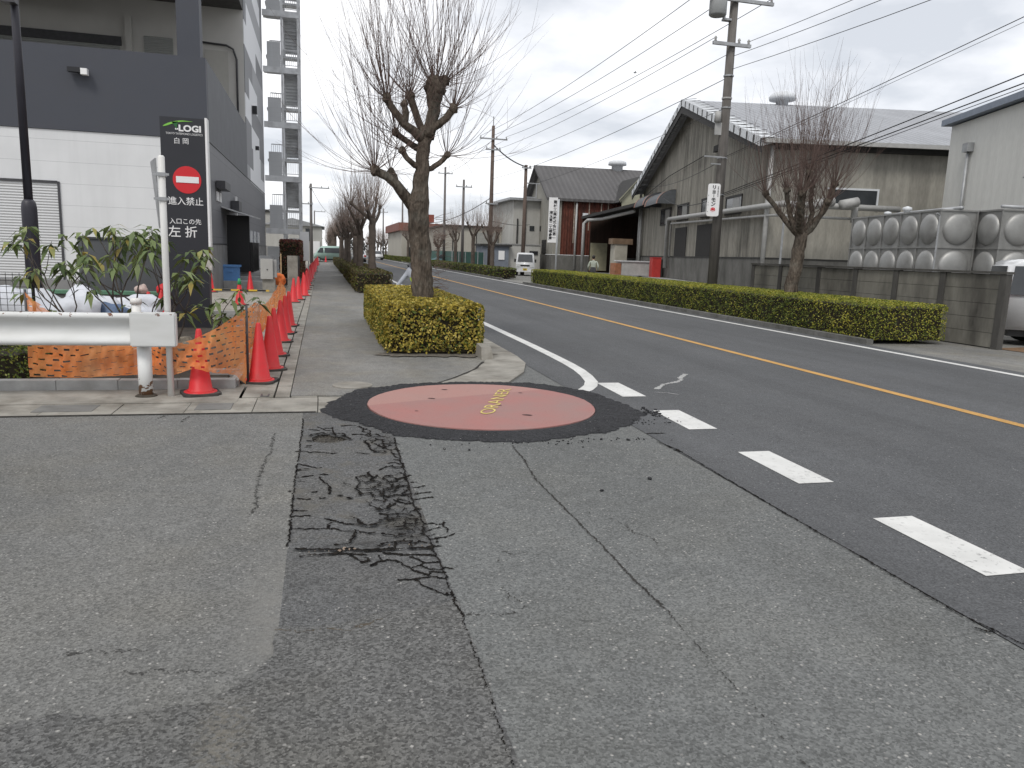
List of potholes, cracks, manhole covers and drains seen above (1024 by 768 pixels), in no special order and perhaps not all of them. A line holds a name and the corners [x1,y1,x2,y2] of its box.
crack [286,418,525,765]
crack [66,648,225,675]
crack [249,434,276,515]
